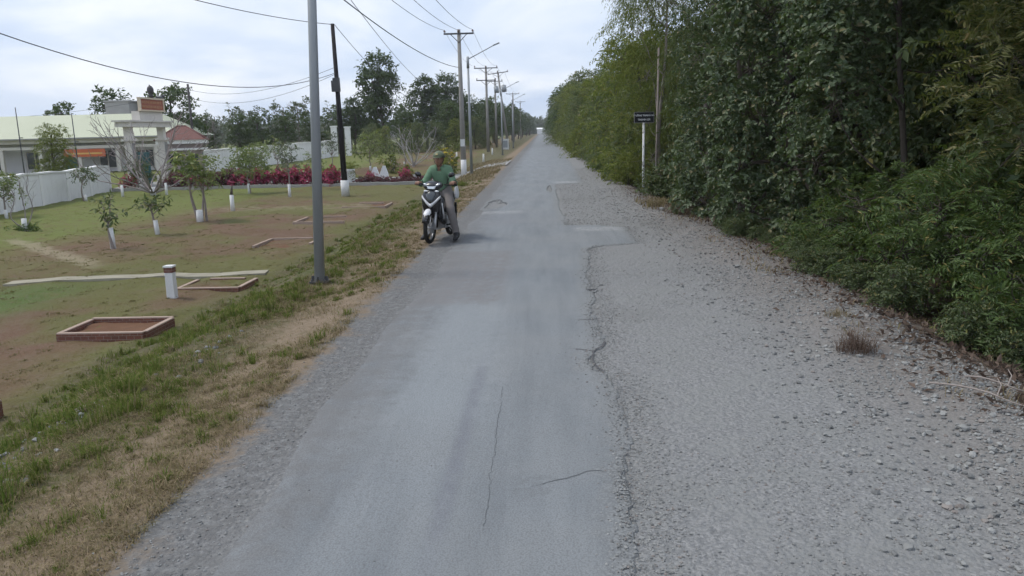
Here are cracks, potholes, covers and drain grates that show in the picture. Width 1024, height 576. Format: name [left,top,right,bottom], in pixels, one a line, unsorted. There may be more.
crack [483,387,503,525]
crack [540,470,617,485]
crack [573,341,609,374]
